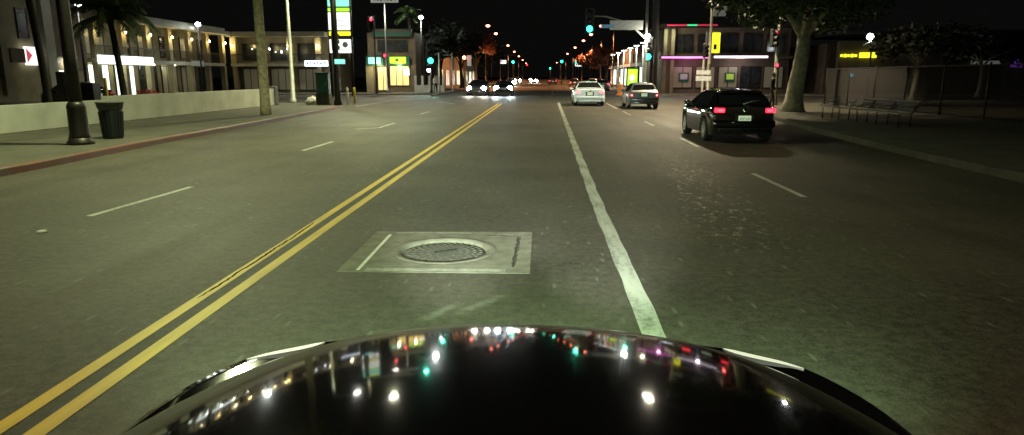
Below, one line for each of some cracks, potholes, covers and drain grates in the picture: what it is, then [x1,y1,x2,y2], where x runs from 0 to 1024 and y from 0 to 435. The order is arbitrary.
manhole cover [336,231,532,274]
